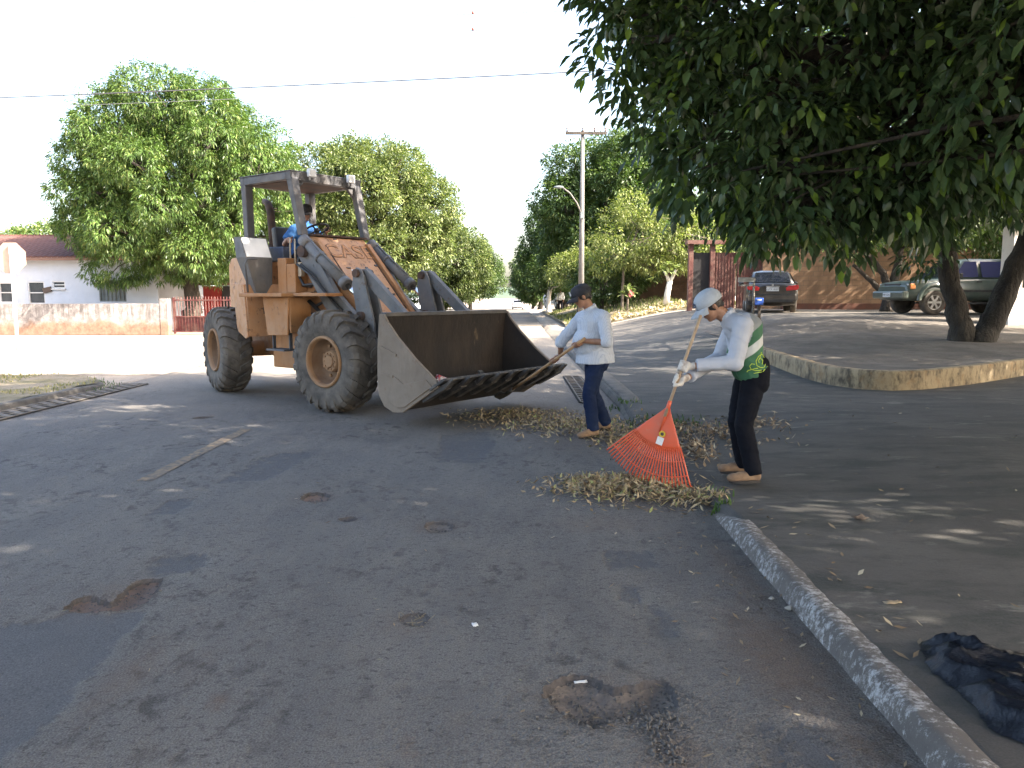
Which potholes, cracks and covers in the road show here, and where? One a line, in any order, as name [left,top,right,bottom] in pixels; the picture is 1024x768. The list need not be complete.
drain grate [0,383,148,421]
pothole [63,578,164,613]
pothole [300,492,331,503]
pothole [389,610,435,627]
pothole [496,673,710,765]
drain grate [562,375,585,403]
pothole [424,521,455,533]
